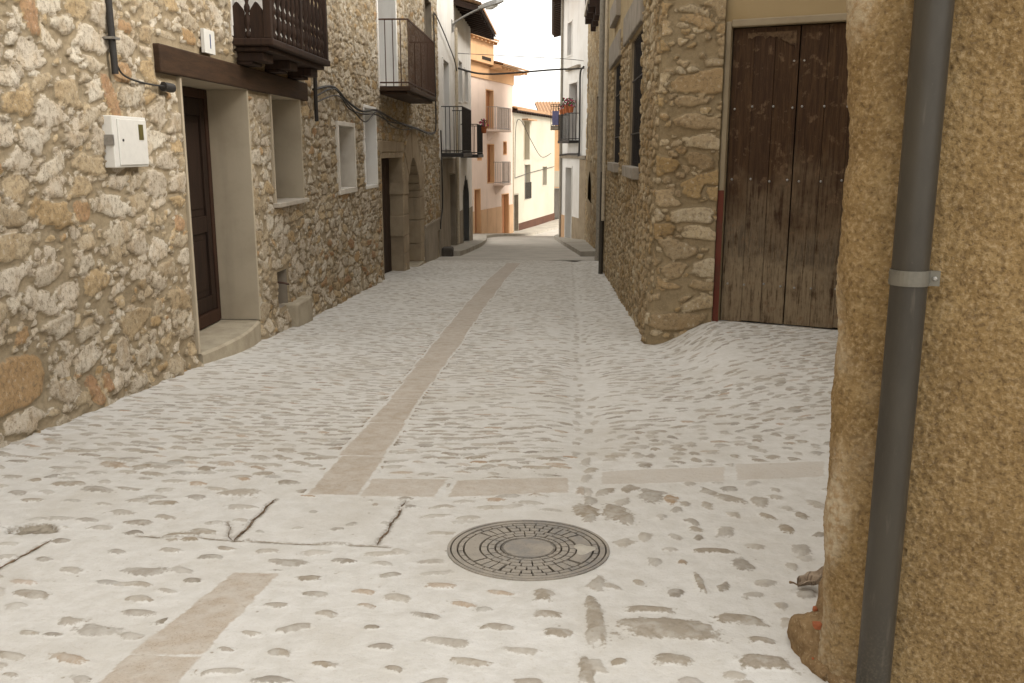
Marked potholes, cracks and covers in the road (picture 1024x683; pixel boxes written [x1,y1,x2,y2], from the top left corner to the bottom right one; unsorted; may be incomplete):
manhole cover [447,520,610,581]
crack [142,499,406,548]
crack [0,540,51,568]
